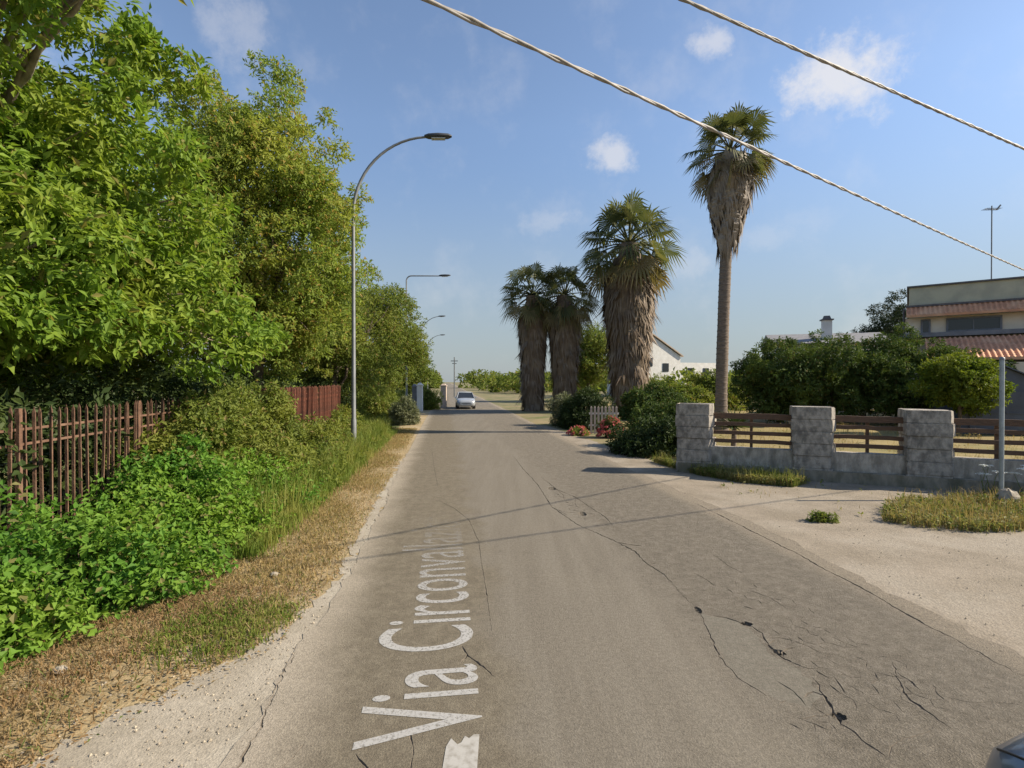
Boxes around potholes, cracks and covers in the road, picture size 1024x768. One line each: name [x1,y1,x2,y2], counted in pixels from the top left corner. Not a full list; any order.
crack [513,456,694,606]
crack [237,653,295,768]
crack [702,506,1023,676]
crack [460,646,492,675]
crack [694,560,1018,756]
